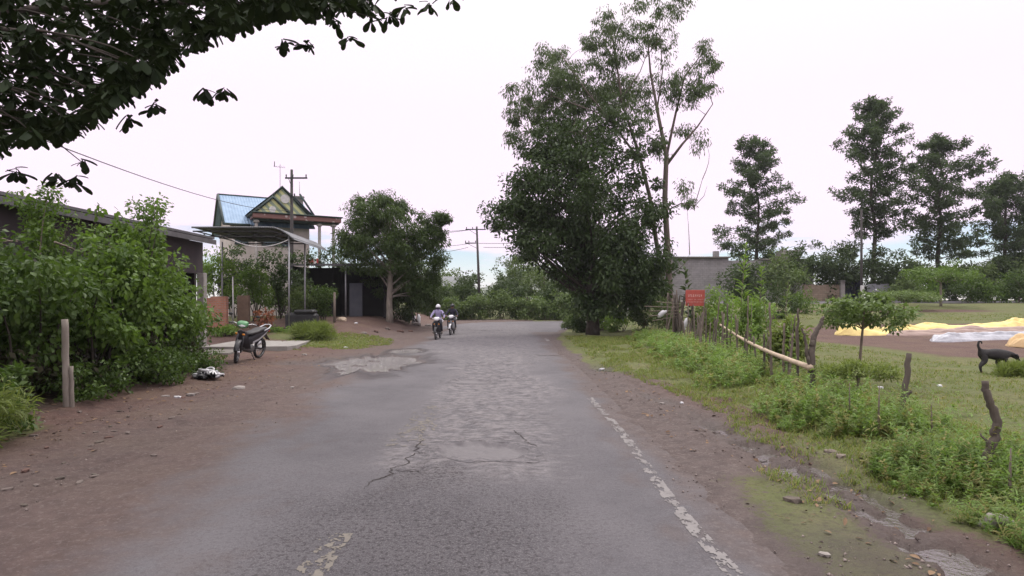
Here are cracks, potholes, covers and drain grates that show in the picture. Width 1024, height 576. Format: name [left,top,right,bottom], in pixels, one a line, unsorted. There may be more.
crack [364,440,428,488]
pothole [315,354,435,377]
